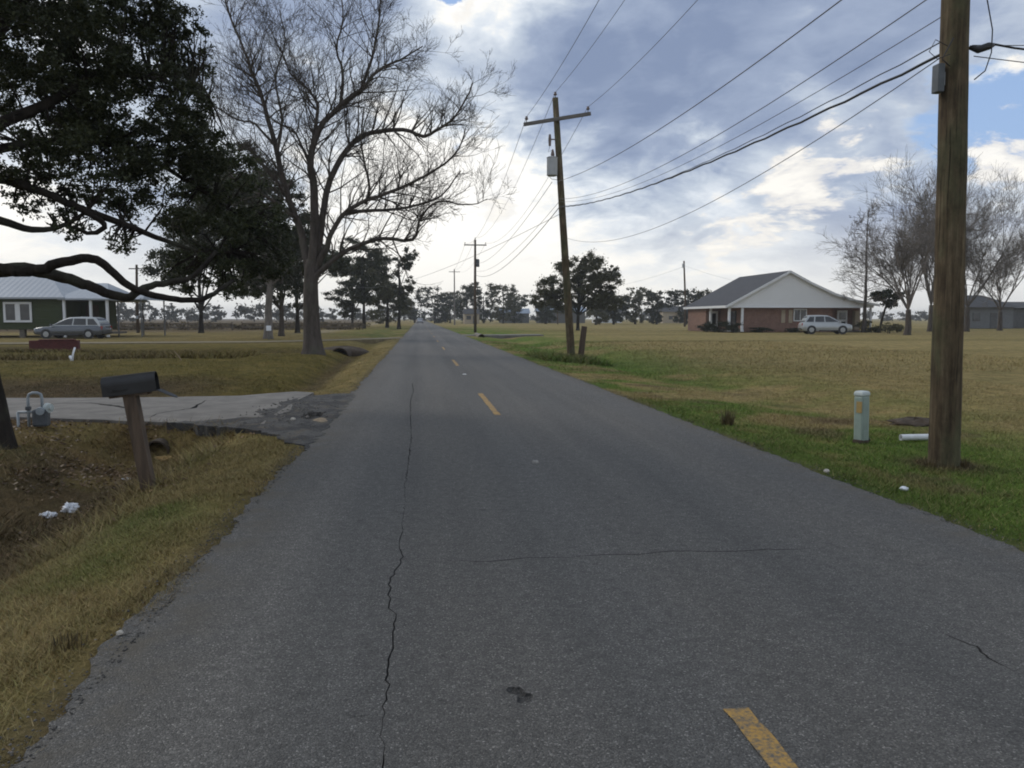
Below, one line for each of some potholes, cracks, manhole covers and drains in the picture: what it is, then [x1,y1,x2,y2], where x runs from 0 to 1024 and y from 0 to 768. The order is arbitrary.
pothole [506,686,533,703]
crack [343,384,414,768]
crack [56,401,204,417]
crack [438,548,807,562]
crack [934,625,1010,669]
